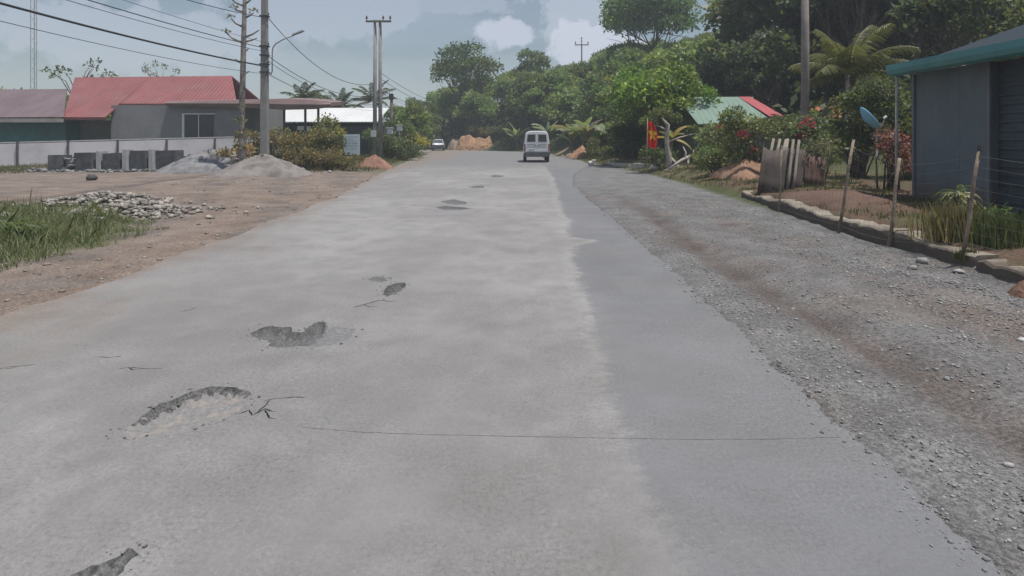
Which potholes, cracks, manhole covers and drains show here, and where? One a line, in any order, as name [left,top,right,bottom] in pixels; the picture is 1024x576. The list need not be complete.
pothole [70,548,139,576]
pothole [383,283,406,297]
pothole [251,321,356,348]
crack [239,397,304,419]
crack [98,356,161,370]
pothole [125,386,251,438]
crack [304,427,839,440]
